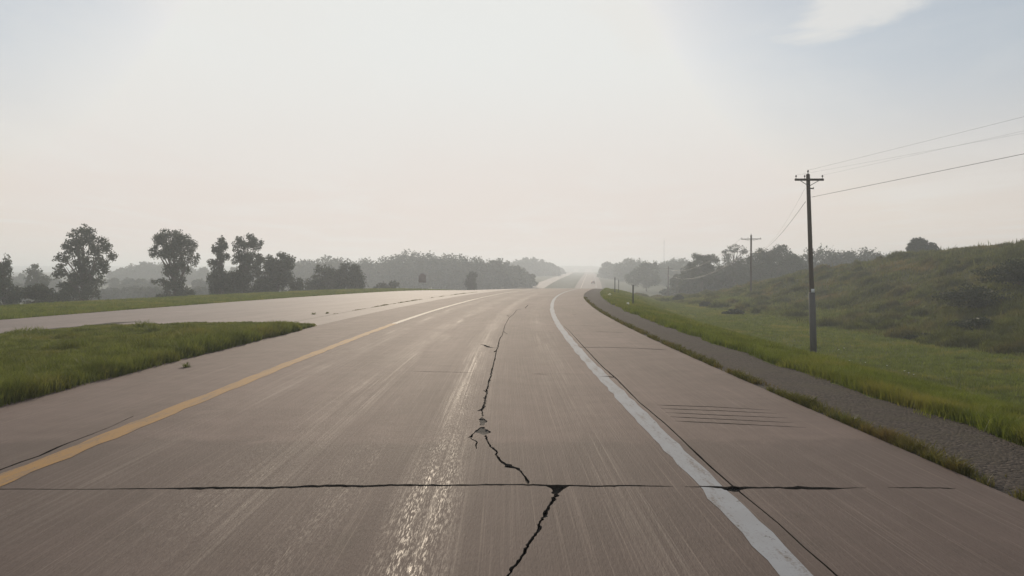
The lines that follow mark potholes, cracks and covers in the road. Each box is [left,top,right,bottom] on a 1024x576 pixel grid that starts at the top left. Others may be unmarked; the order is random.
crack [40,305,954,576]
